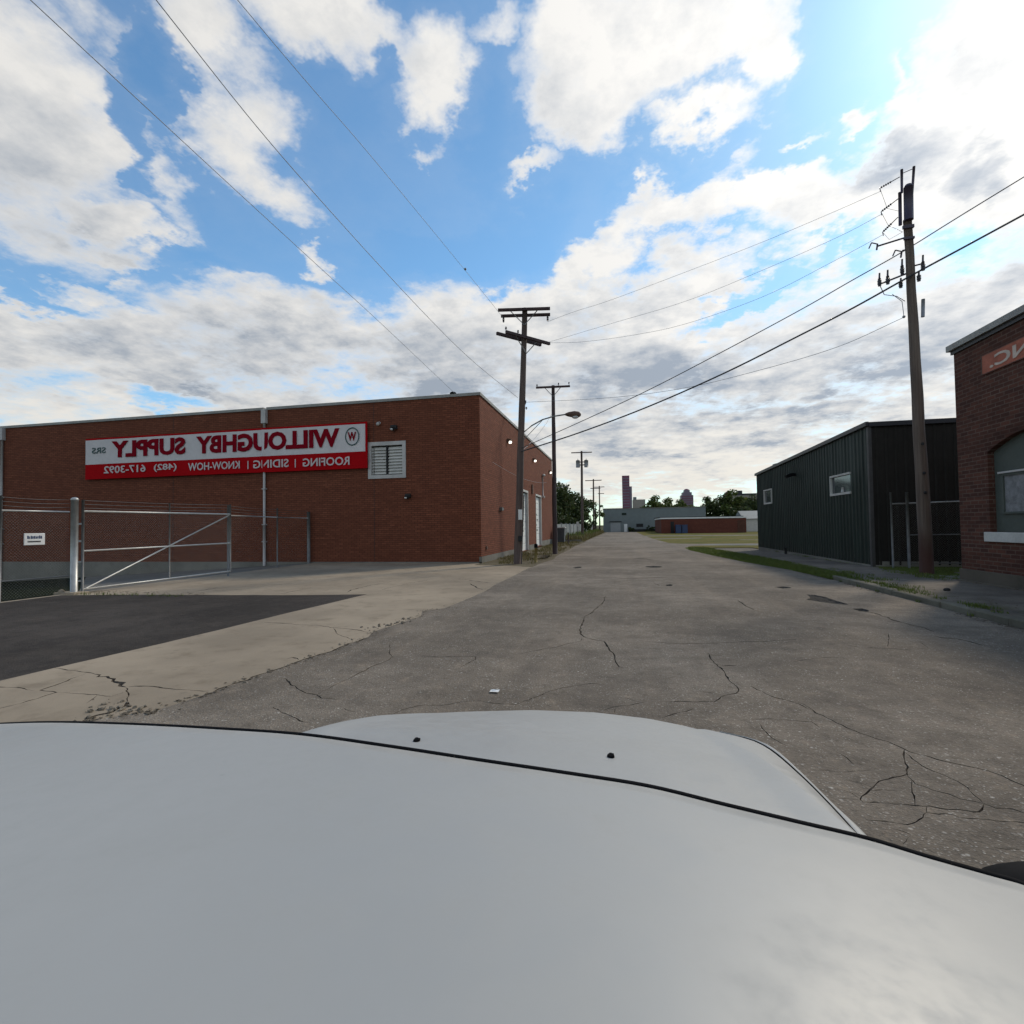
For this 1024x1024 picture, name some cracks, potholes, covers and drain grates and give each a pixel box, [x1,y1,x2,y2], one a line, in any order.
crack [751,686,1024,844]
pothole [806,594,848,605]
crack [2,668,197,721]
crack [286,644,392,712]
crack [391,597,619,715]
crack [660,639,796,718]
